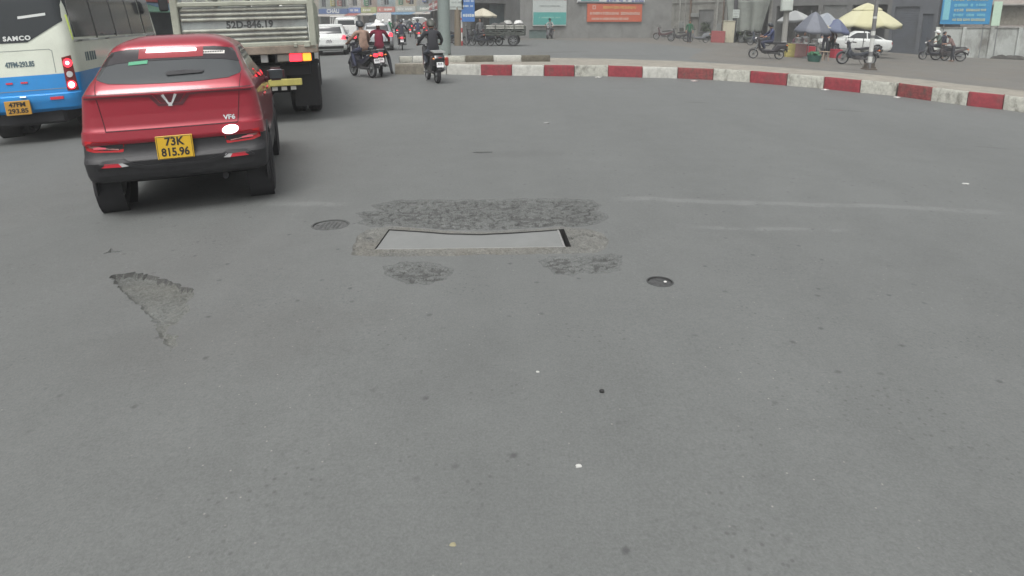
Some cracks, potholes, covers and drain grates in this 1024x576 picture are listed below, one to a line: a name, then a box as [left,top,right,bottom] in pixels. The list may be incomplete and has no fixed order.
manhole cover [646,276,674,287]
manhole cover [351,227,609,257]
pothole [109,272,194,351]
